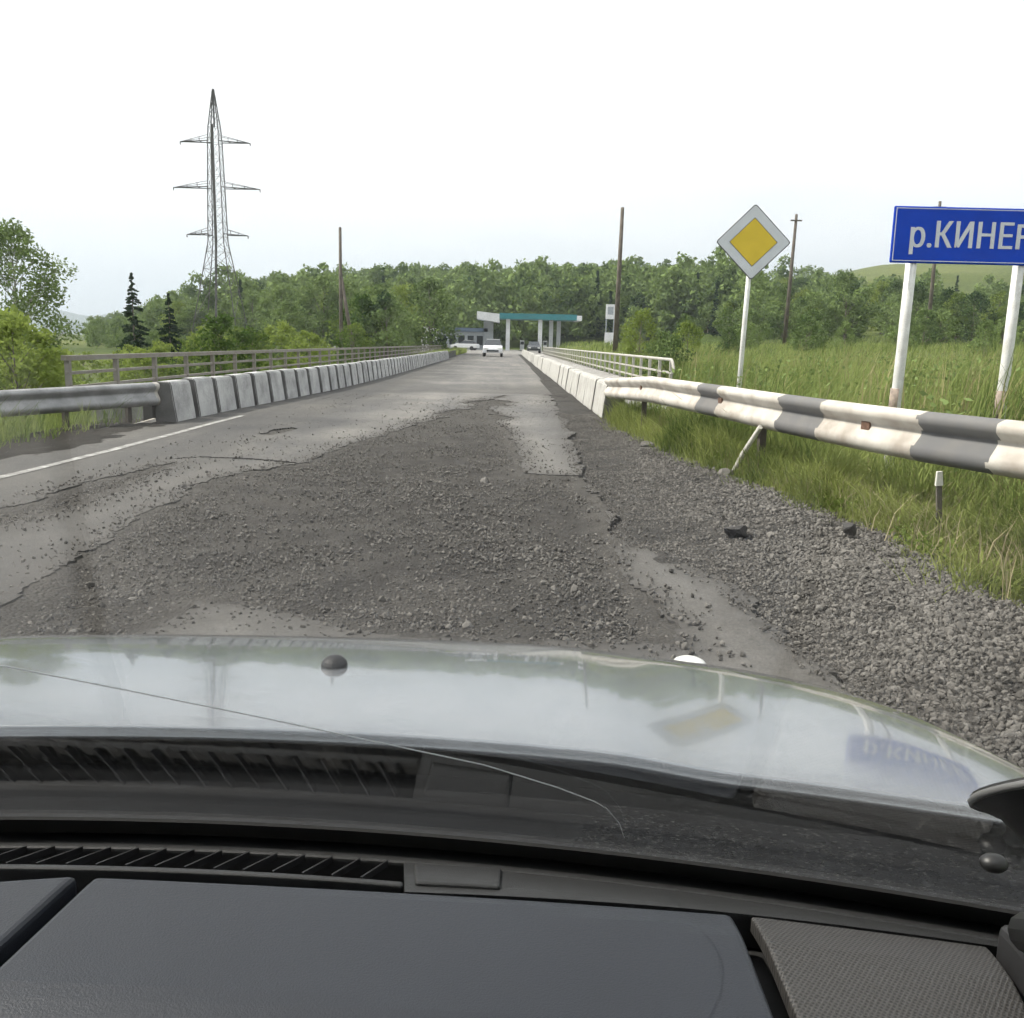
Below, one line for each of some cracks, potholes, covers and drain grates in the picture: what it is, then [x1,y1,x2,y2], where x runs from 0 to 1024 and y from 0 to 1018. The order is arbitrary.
pothole [0,395,681,645]
